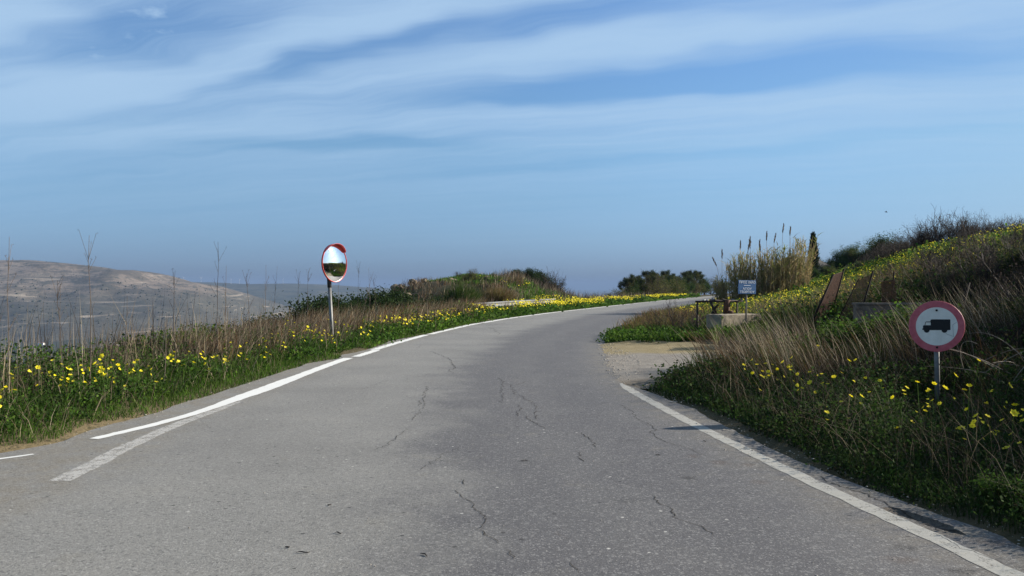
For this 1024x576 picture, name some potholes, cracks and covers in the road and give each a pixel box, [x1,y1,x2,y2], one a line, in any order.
crack [455,479,515,557]
